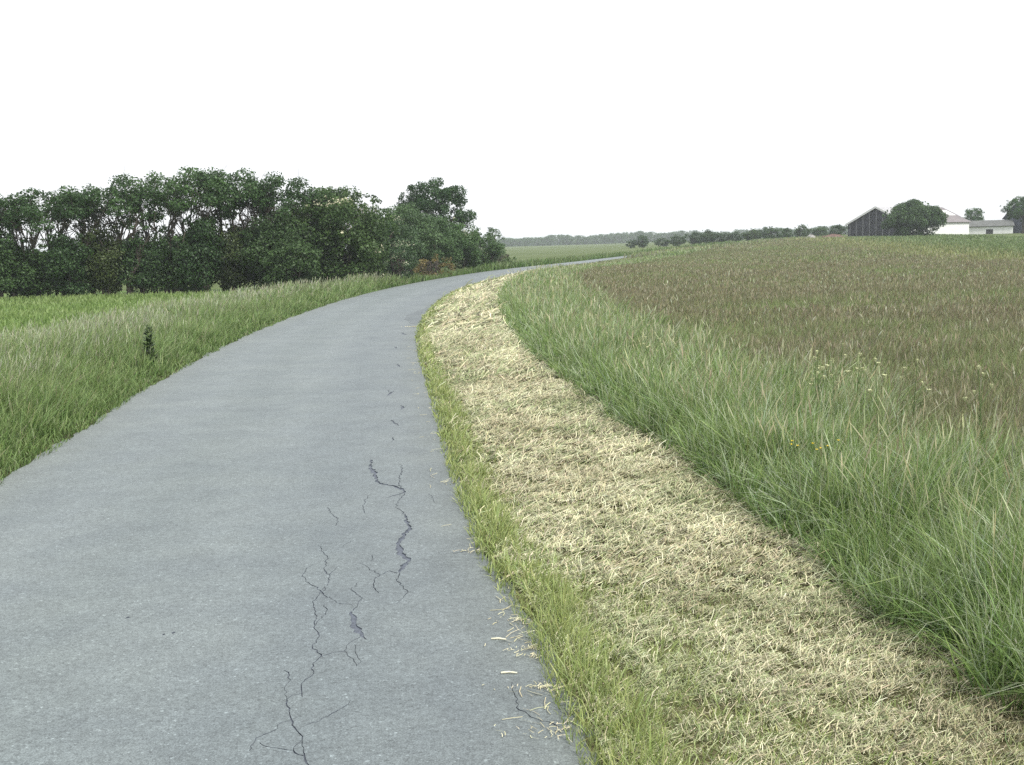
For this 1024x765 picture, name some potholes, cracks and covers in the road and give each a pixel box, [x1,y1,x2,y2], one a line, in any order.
crack [511,682,563,729]
crack [249,460,412,765]
